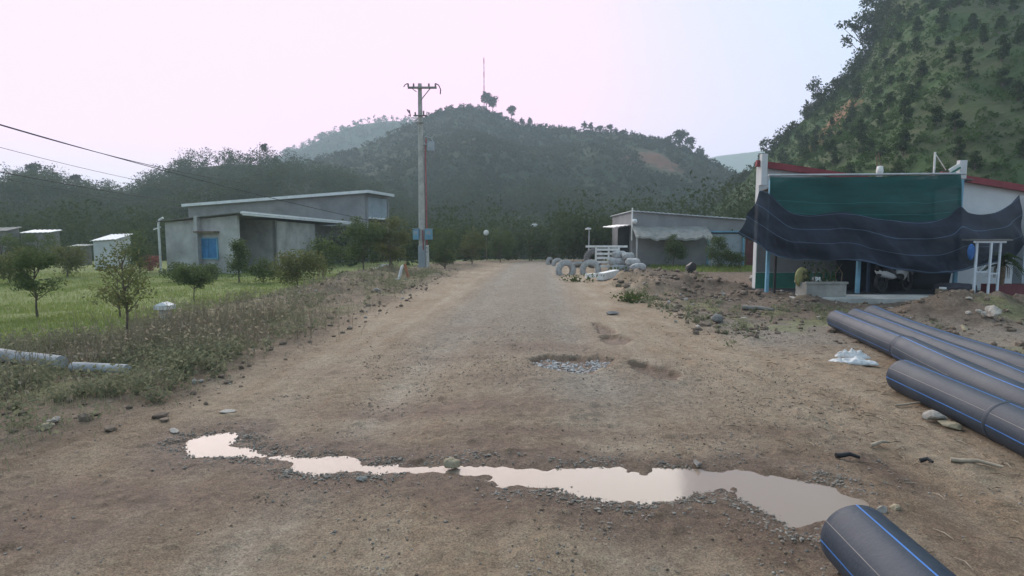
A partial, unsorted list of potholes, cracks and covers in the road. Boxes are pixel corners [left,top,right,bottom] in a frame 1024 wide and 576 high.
pothole [524,353,620,374]
pothole [598,334,638,345]
pothole [588,322,620,335]
pothole [152,422,896,545]
pothole [620,359,687,381]
